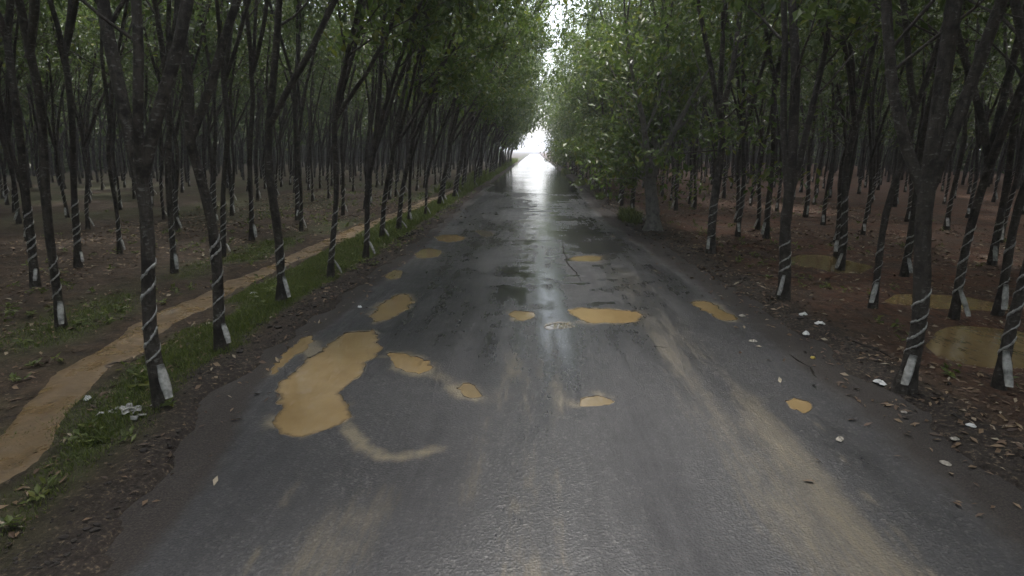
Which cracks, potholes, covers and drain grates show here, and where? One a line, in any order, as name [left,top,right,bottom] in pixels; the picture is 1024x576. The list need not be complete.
pothole [785,398,813,414]
pothole [544,322,572,330]
pothole [689,300,740,321]
pothole [509,310,535,321]
pothole [414,248,442,258]
pothole [457,382,483,399]
crack [541,240,586,280]
pothole [385,270,403,280]
pothole [367,293,415,322]
pothole [386,352,434,374]
pothole [579,395,615,407]
pothole [567,307,643,324]
